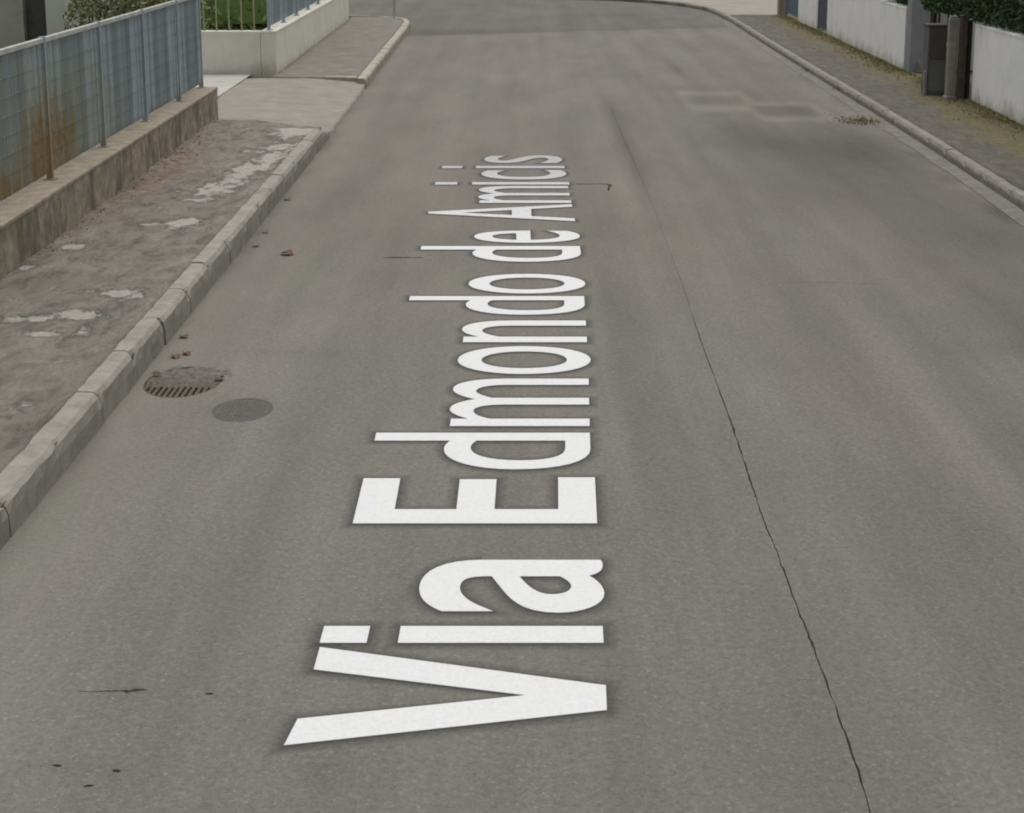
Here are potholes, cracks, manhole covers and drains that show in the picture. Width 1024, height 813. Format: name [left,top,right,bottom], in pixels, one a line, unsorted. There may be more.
crack [612,110,871,813]
drain grate [143,365,234,398]
manhole cover [211,399,273,422]
